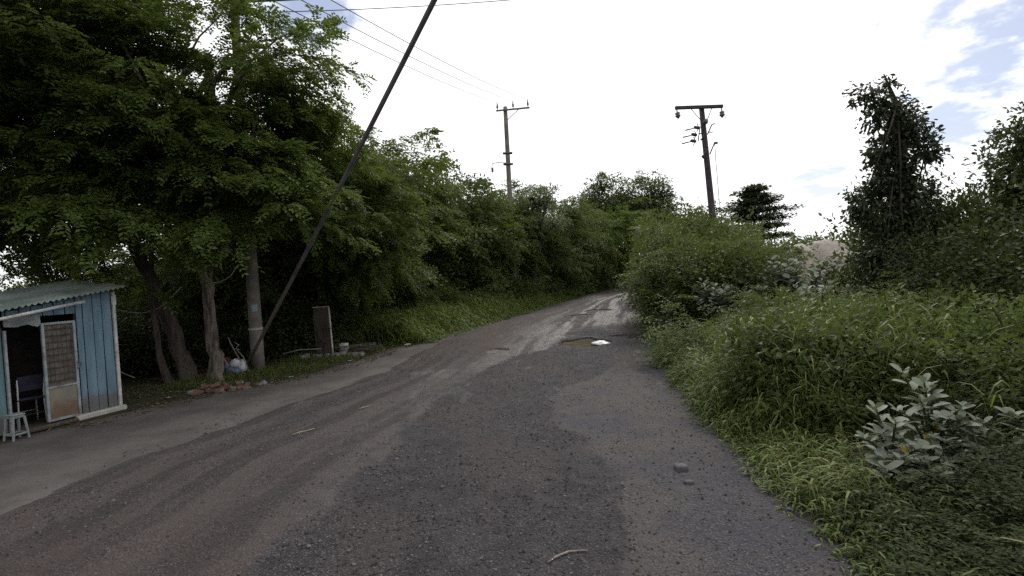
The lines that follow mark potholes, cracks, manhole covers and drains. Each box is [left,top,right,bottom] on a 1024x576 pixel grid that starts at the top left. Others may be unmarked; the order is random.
pothole [553,336,617,348]
